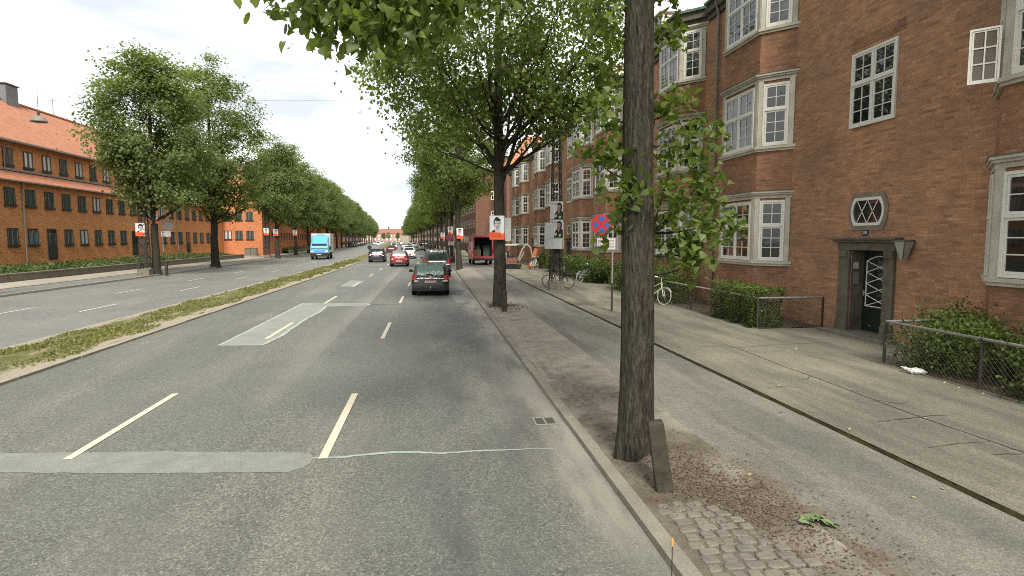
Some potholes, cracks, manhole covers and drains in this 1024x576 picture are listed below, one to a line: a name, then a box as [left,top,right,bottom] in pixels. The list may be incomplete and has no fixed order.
crack [312,448,553,459]
drain grate [532,417,558,426]
